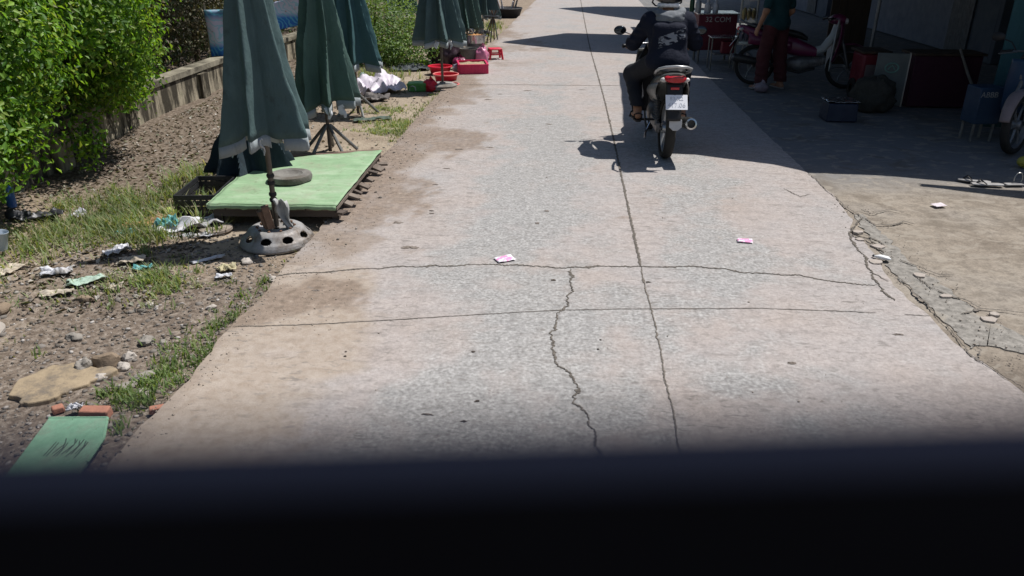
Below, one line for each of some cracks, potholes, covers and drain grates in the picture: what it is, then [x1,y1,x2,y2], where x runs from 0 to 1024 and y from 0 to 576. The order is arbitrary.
crack [276,173,1024,414]
